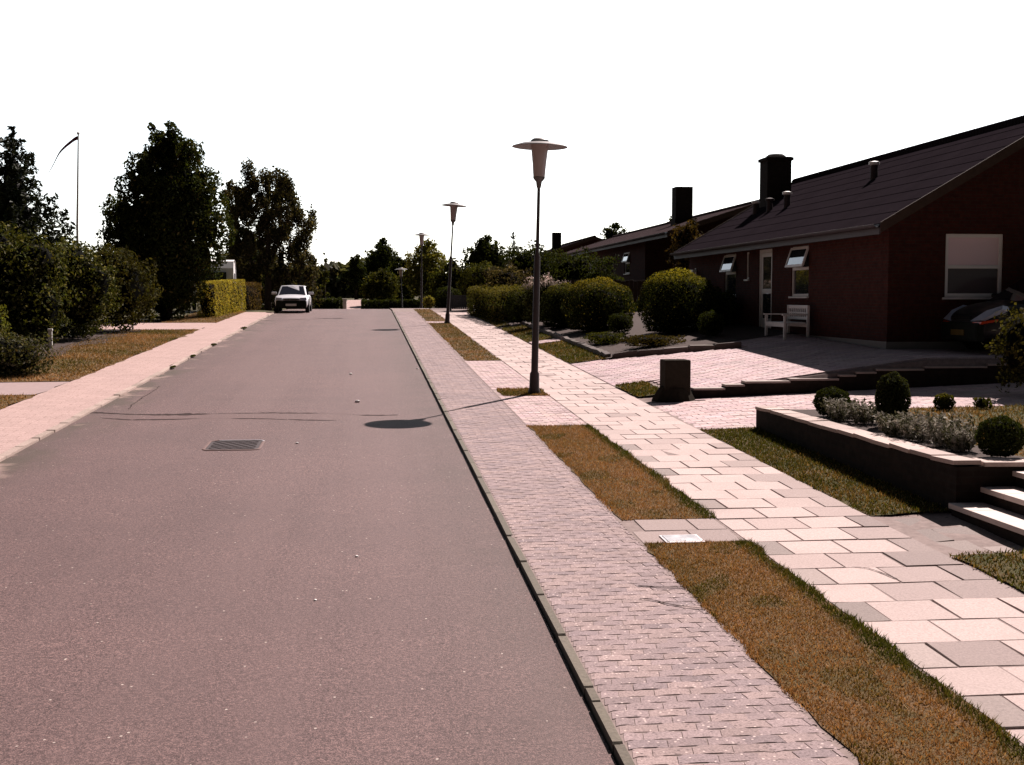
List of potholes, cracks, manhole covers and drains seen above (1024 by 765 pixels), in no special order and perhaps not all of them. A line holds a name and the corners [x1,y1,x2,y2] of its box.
utility cover [659,534,704,544]
crack [638,585,703,609]
crack [92,386,354,420]
